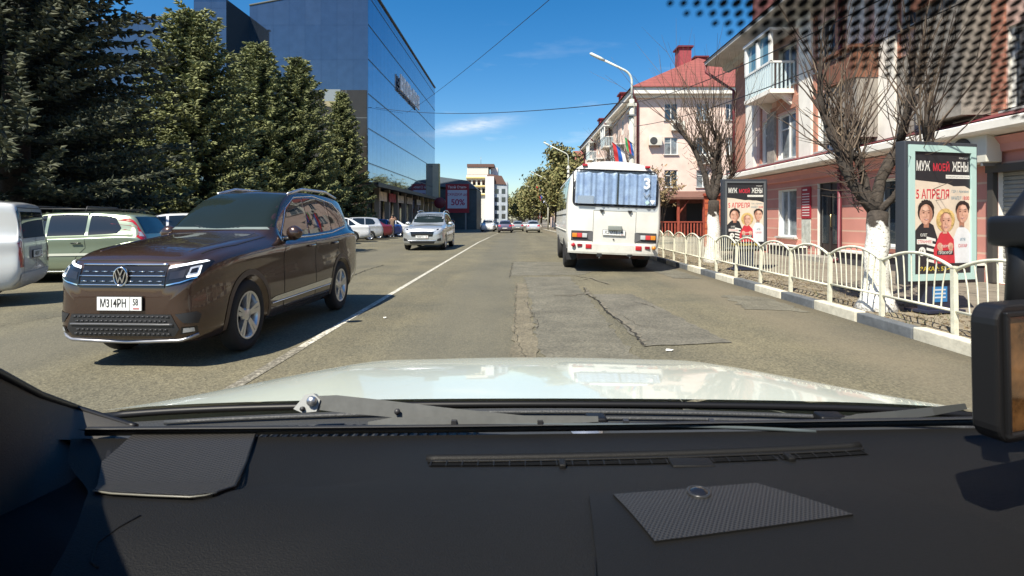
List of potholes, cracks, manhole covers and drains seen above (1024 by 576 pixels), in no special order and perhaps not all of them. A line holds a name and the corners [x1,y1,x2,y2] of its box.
crack [509,261,539,356]
